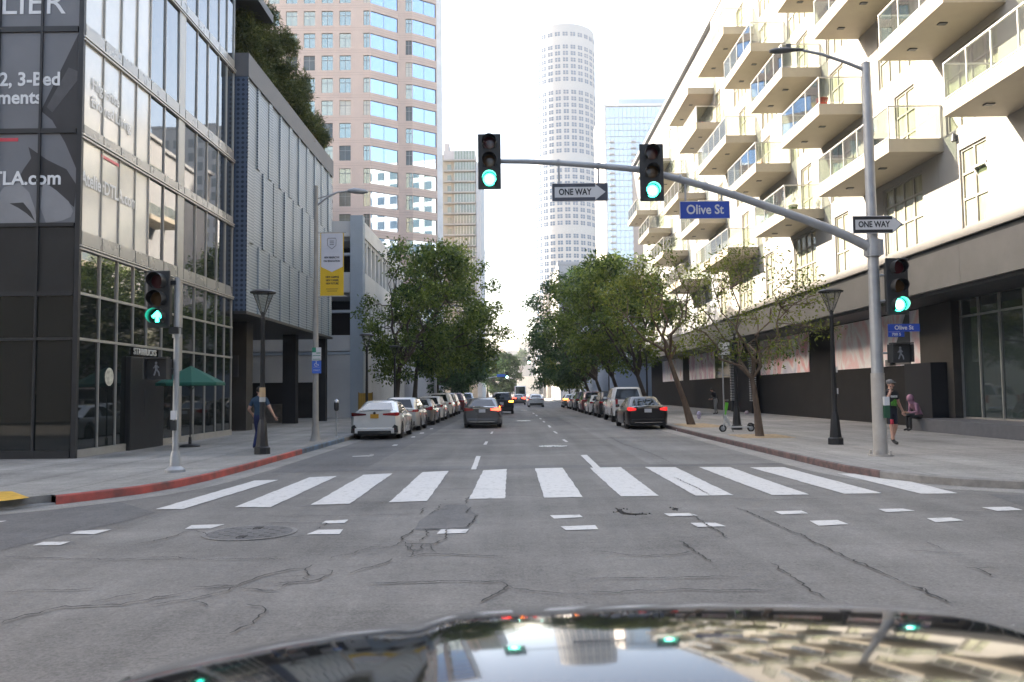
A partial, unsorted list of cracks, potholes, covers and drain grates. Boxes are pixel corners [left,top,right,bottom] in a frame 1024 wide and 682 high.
crack [329,497,497,572]
crack [772,563,831,601]
crack [9,530,333,633]
crack [387,580,559,602]
crack [594,513,755,593]
manhole cover [201,525,298,541]
